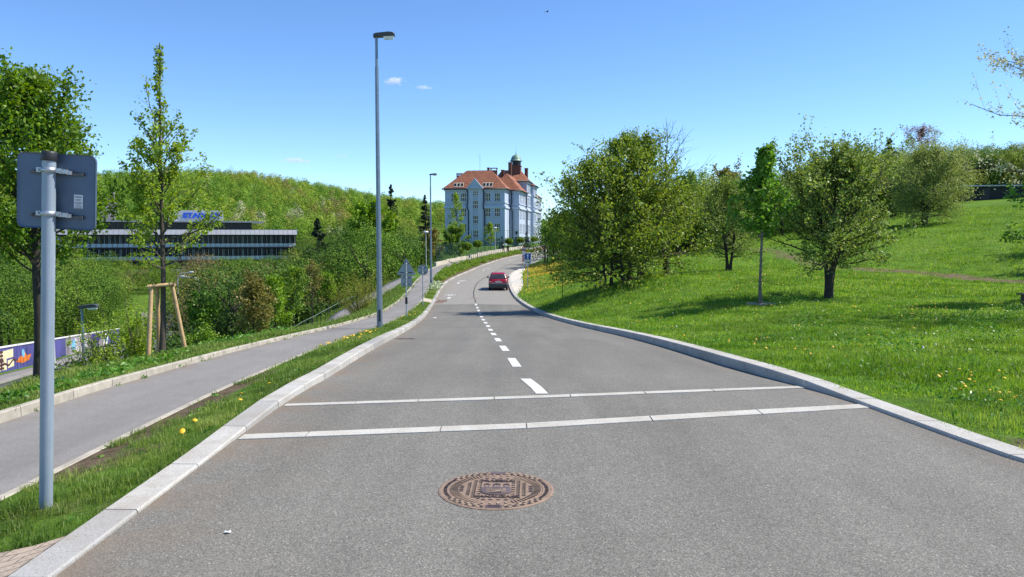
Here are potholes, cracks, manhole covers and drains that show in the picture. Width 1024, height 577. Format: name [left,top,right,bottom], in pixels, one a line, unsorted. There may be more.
manhole cover [438,472,554,510]
